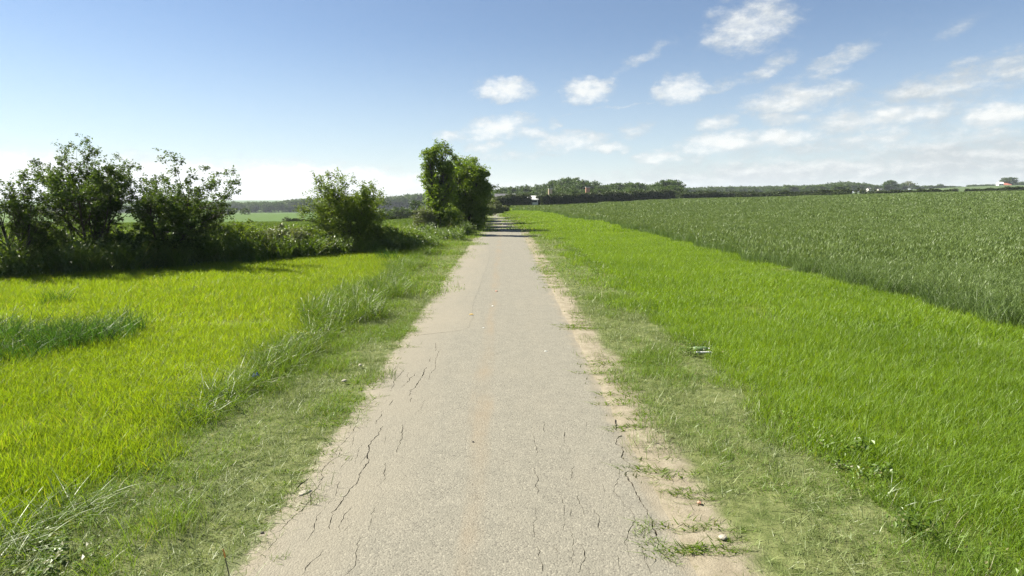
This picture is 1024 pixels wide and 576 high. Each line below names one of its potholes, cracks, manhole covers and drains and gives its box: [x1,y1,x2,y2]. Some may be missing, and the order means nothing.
crack [269,343,441,575]
crack [603,420,677,573]
crack [533,467,601,572]
